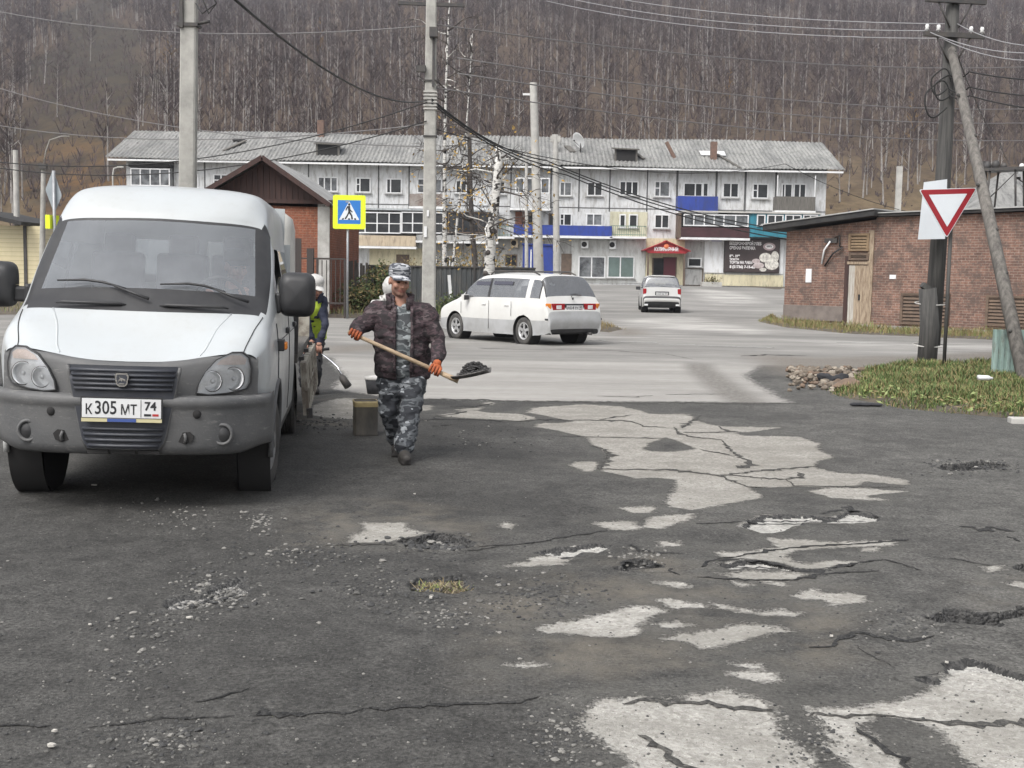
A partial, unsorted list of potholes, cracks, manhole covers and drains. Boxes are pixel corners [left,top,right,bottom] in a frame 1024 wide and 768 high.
crack [533,415,905,488]
crack [696,506,920,581]
pothole [910,604,1024,634]
pothole [394,573,496,597]
pothole [140,574,273,615]
crack [811,631,934,666]
pothole [729,507,894,536]
pothole [926,460,1022,474]
crack [0,688,540,728]
crack [811,711,1024,768]
pothole [388,532,487,555]
crack [624,698,773,711]
